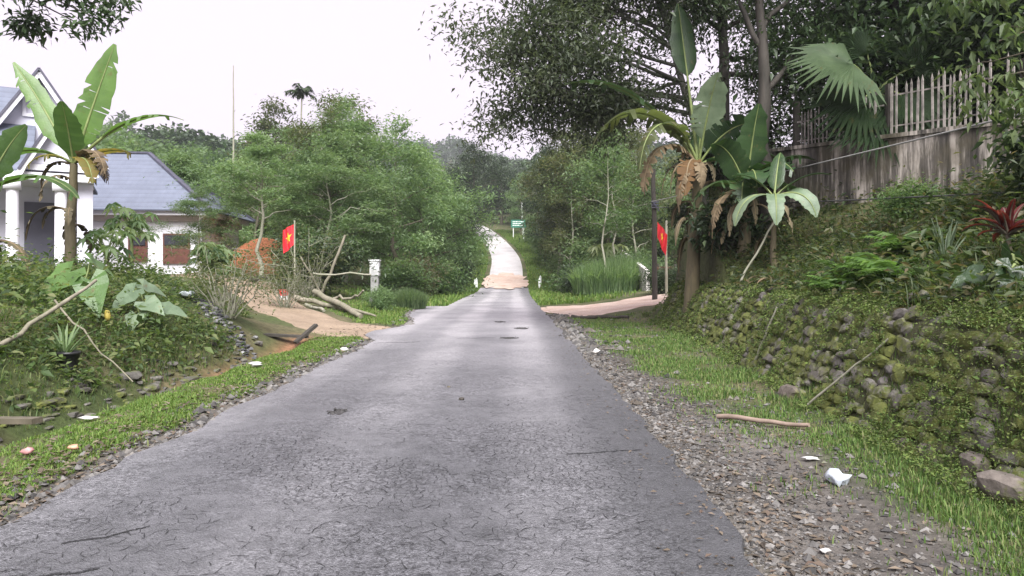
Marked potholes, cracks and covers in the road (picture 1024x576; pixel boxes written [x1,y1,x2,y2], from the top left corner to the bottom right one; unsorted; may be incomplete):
crack [113,501,722,576]
crack [0,491,220,576]
